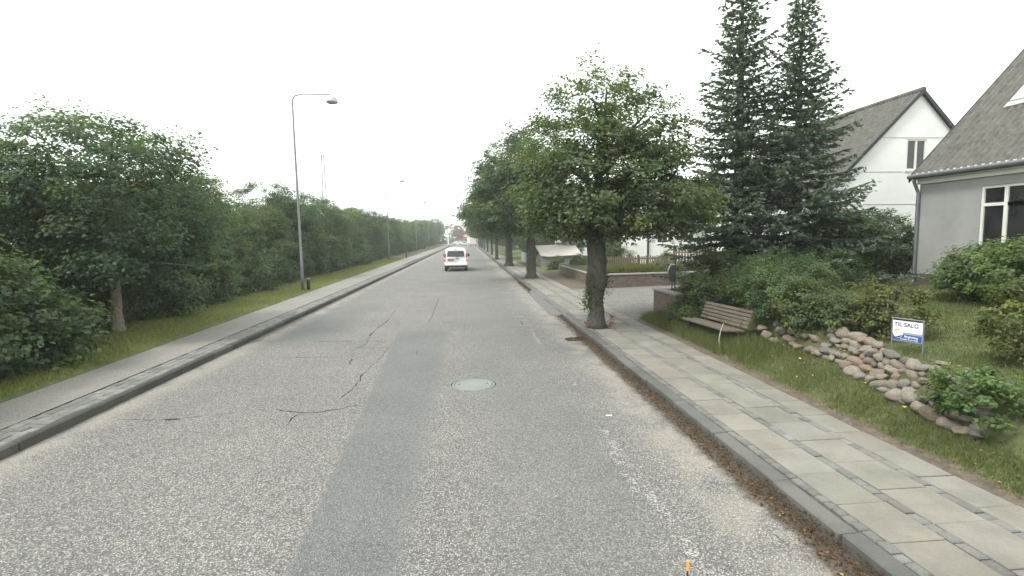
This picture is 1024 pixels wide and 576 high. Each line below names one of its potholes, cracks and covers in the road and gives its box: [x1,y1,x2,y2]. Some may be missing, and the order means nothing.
manhole cover [452,379,495,391]
crack [259,341,392,427]
